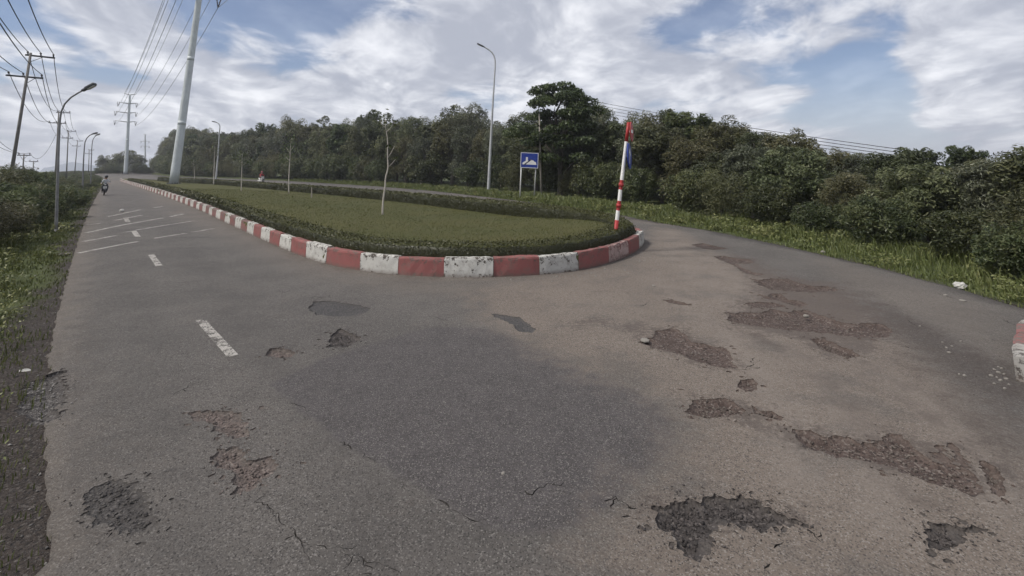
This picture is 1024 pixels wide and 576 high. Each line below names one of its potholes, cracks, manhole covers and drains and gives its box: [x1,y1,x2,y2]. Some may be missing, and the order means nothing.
pothole [714,256,764,276]
pothole [775,420,1010,504]
pothole [175,402,267,442]
pothole [736,372,766,392]
pothole [669,389,764,430]
pothole [314,328,367,350]
pothole [948,454,1021,506]
pothole [199,436,306,501]
pothole [743,277,847,297]
pothole [720,307,904,341]
pothole [54,464,181,546]
